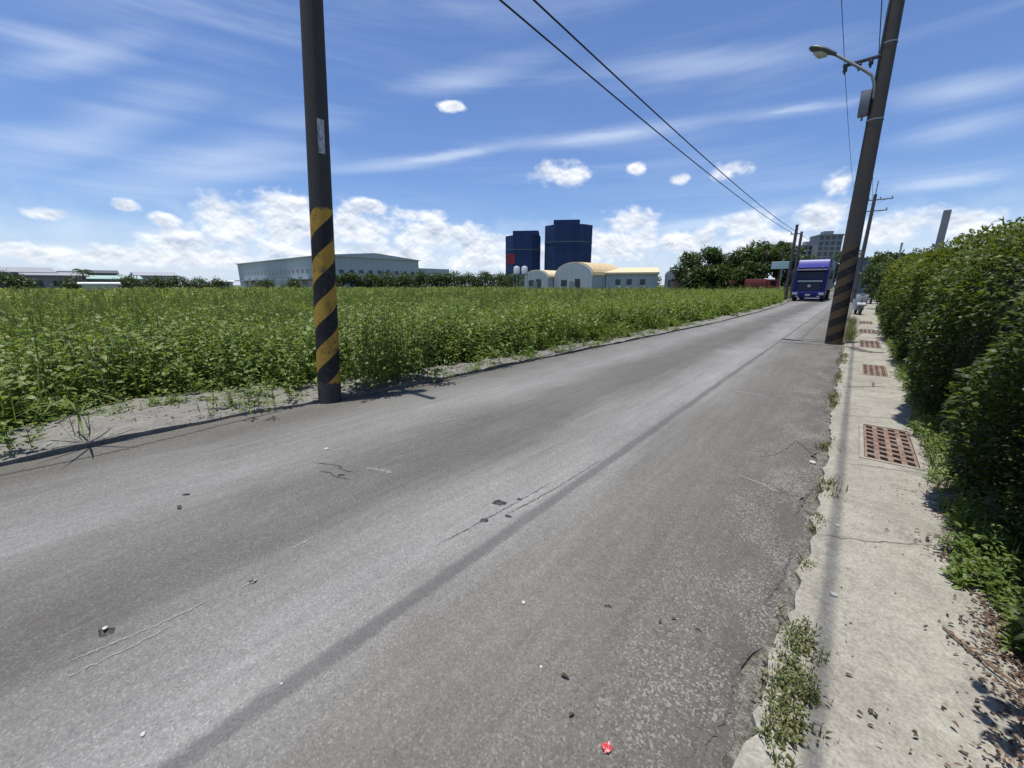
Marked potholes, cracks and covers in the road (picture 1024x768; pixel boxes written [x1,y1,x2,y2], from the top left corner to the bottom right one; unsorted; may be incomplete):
crack [446,459,602,540]
crack [705,646,752,747]
crack [317,462,355,479]
crack [766,547,793,600]
crack [795,486,815,514]
